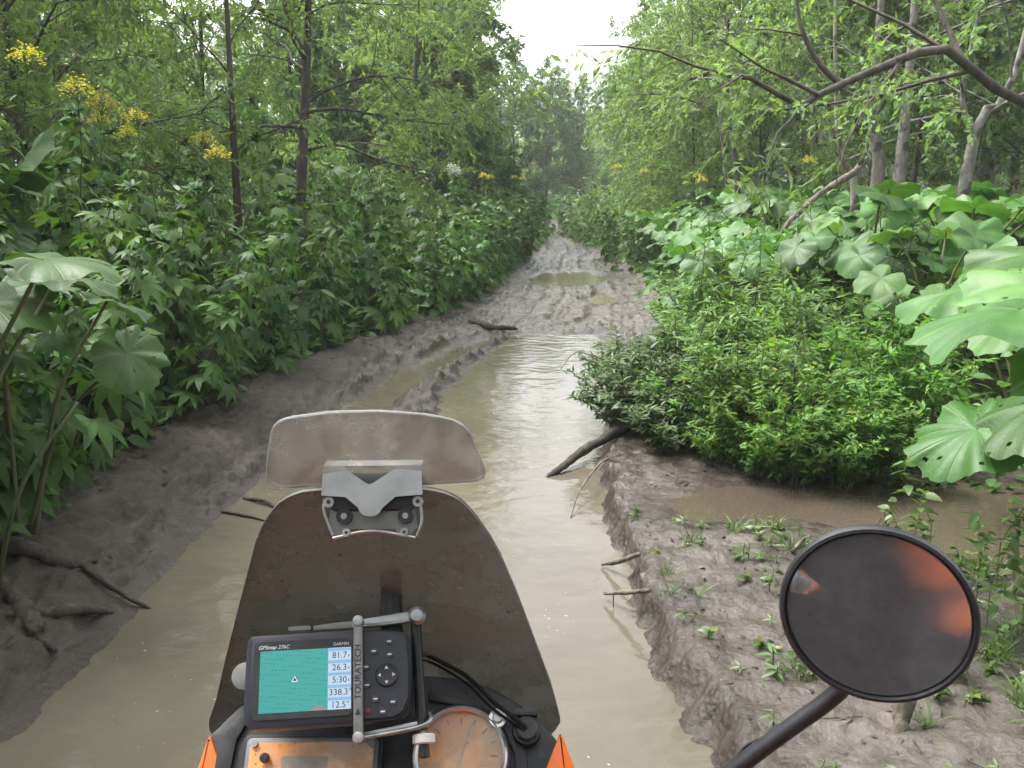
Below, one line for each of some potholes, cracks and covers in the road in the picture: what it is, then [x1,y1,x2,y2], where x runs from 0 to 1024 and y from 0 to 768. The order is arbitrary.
pothole [580,291,624,305]
pothole [520,268,612,287]
